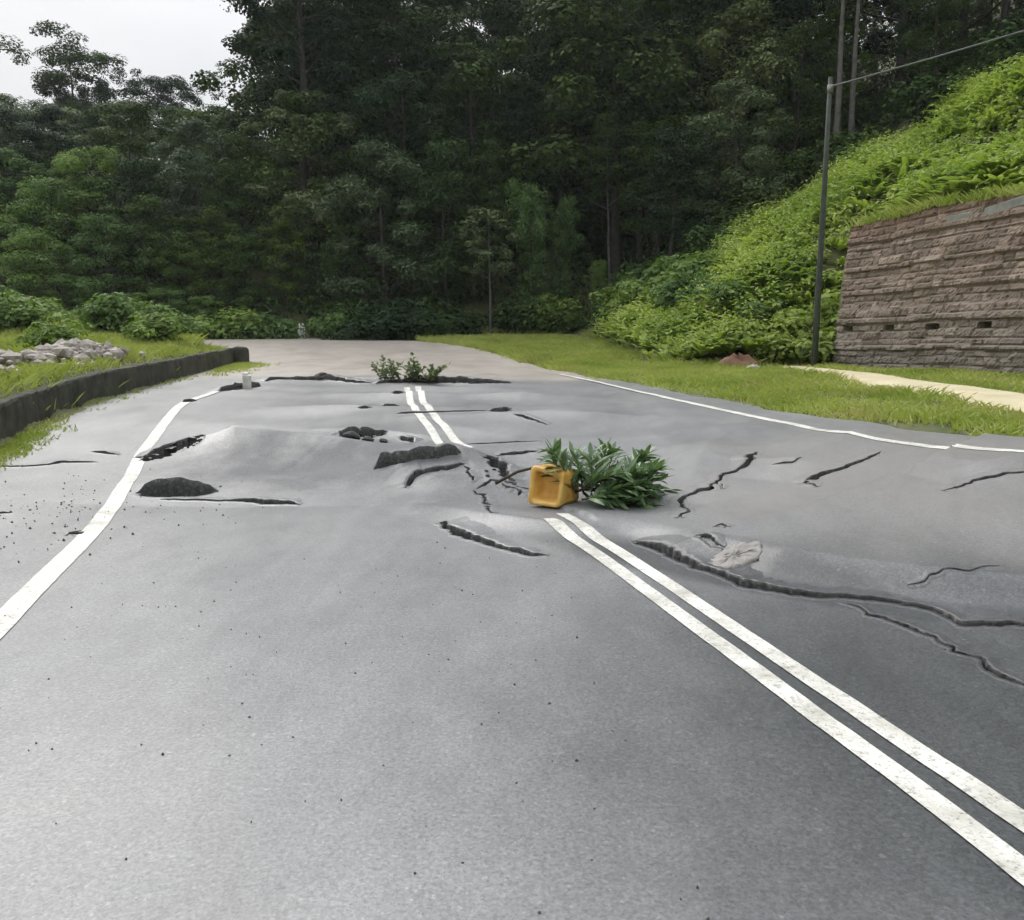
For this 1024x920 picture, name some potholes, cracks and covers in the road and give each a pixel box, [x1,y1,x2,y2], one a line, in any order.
crack [373,413,553,558]
pothole [328,426,424,443]
pothole [132,477,220,499]
crack [630,451,1024,688]
crack [158,496,302,506]
crack [0,433,211,468]
